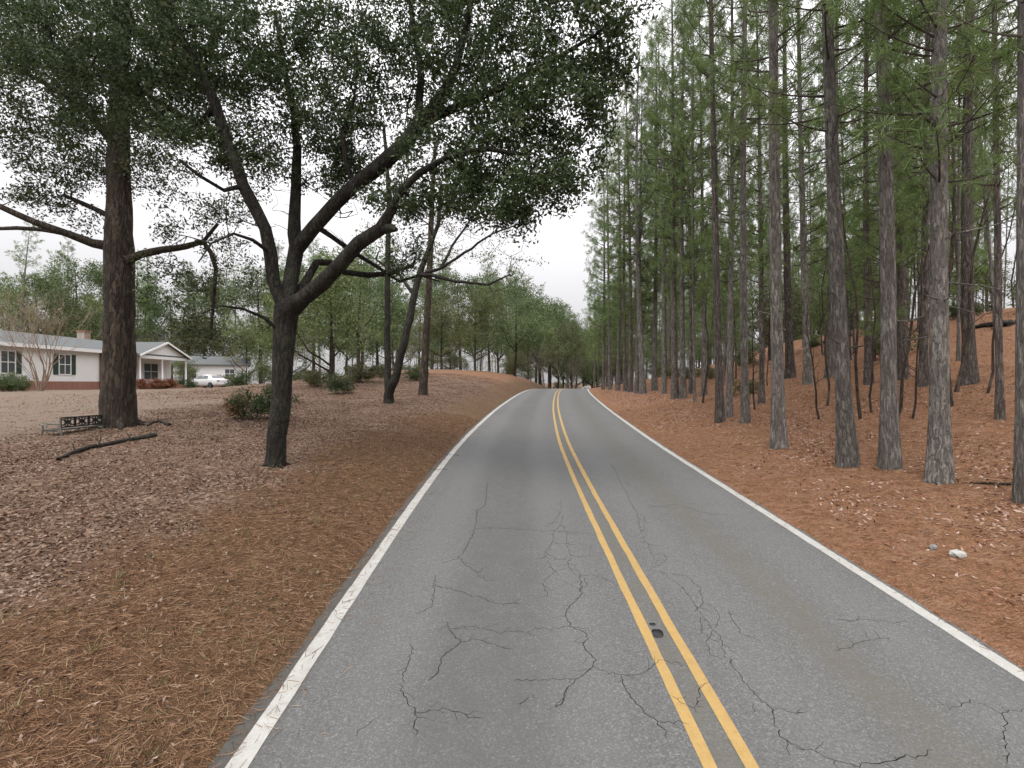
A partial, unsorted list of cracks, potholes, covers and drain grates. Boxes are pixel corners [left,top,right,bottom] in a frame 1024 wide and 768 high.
crack [352,644,478,737]
crack [615,469,725,567]
crack [938,701,1022,764]
crack [431,484,686,739]
crack [660,570,930,768]
